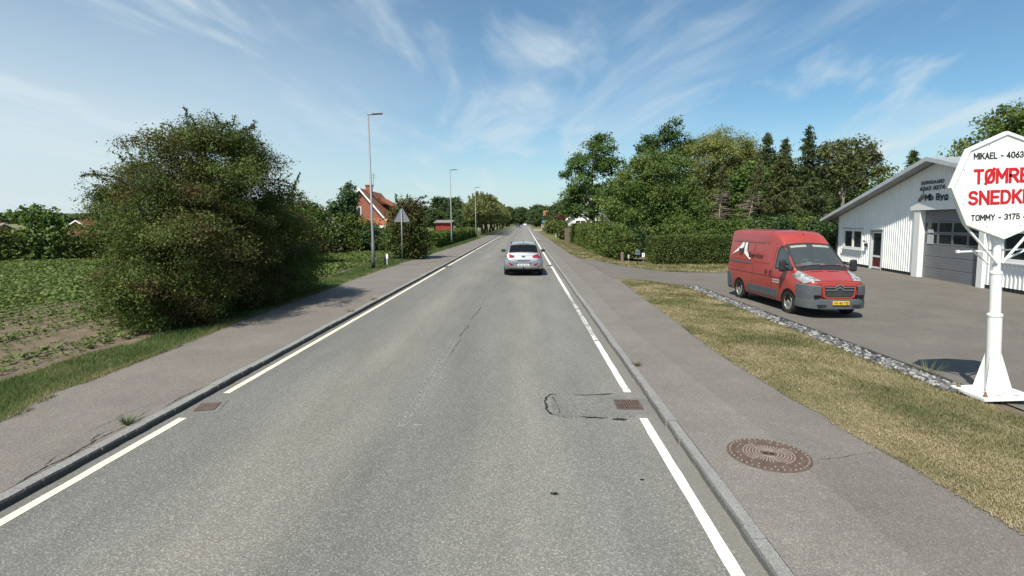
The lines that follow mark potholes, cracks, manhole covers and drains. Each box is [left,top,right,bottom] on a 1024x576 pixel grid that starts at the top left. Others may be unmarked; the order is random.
drain grate [190,400,228,414]
crack [544,393,602,418]
drain grate [606,398,656,414]
manhole cover [727,438,813,473]
